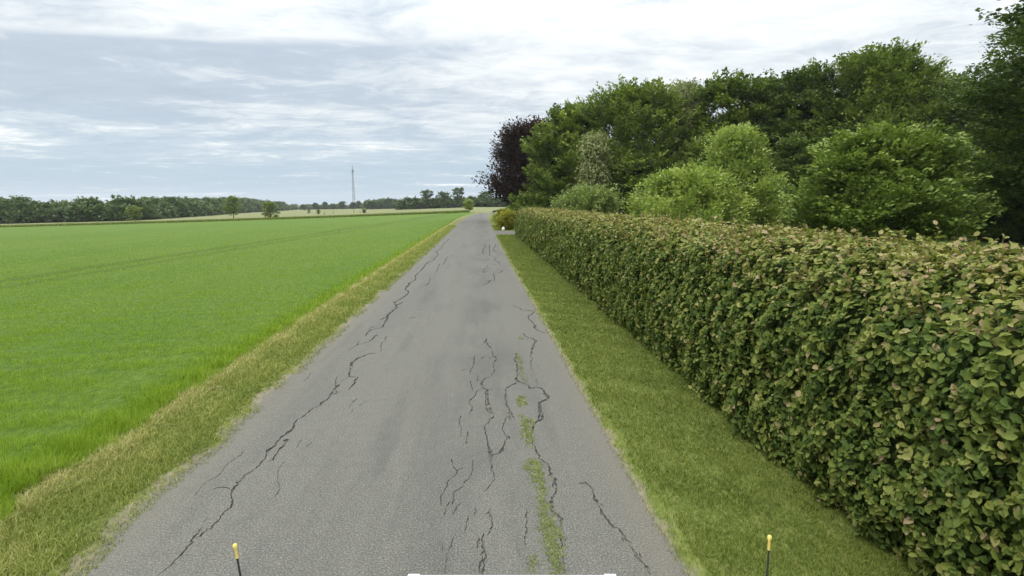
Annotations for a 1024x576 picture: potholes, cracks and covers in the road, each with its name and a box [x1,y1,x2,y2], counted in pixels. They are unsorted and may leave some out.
crack [158,240,448,575]
crack [440,304,565,575]
crack [482,244,511,285]
crack [580,482,651,575]
